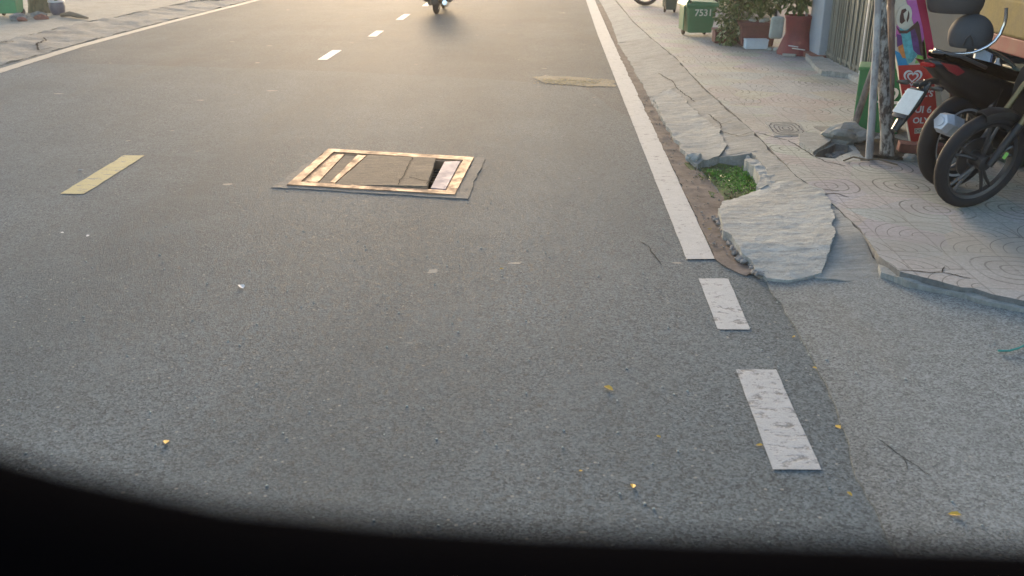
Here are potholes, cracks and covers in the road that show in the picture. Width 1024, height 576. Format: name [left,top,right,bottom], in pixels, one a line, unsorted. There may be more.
manhole cover [765,122,806,136]
manhole cover [271,148,485,200]
pothole [685,155,775,200]
